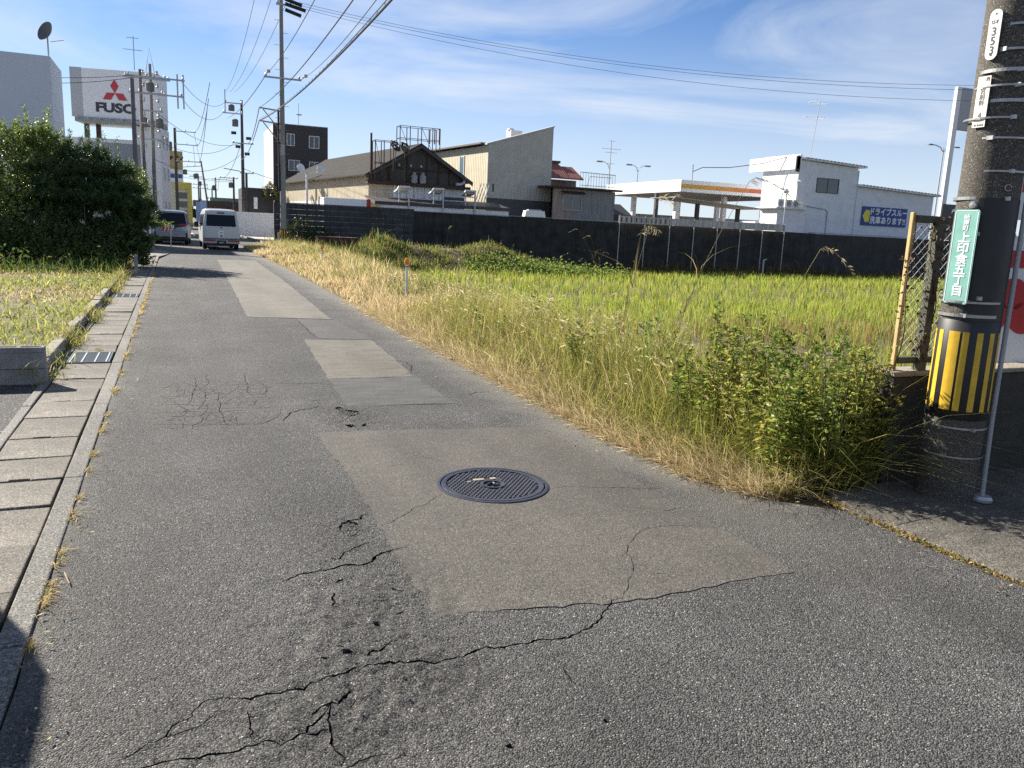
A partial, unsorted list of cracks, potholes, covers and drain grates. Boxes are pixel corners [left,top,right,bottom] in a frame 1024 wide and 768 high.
manhole cover [437,467,549,503]
pothole [339,521,360,537]
crack [164,373,318,429]
drain grate [66,352,114,364]
crack [122,525,685,768]
pothole [334,407,360,417]
